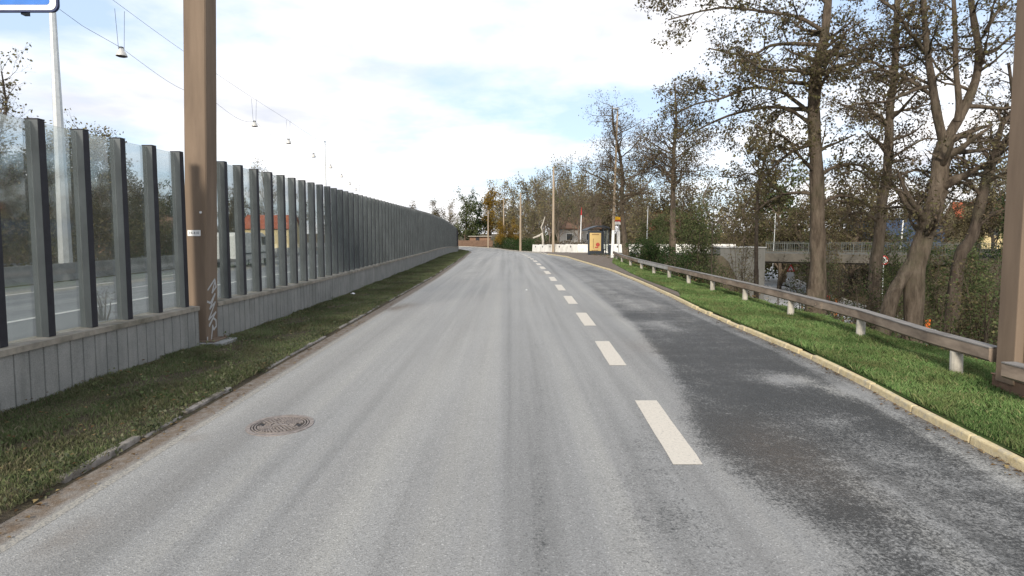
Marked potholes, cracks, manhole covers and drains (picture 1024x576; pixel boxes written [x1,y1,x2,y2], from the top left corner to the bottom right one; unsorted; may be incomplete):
manhole cover [245,414,314,436]
